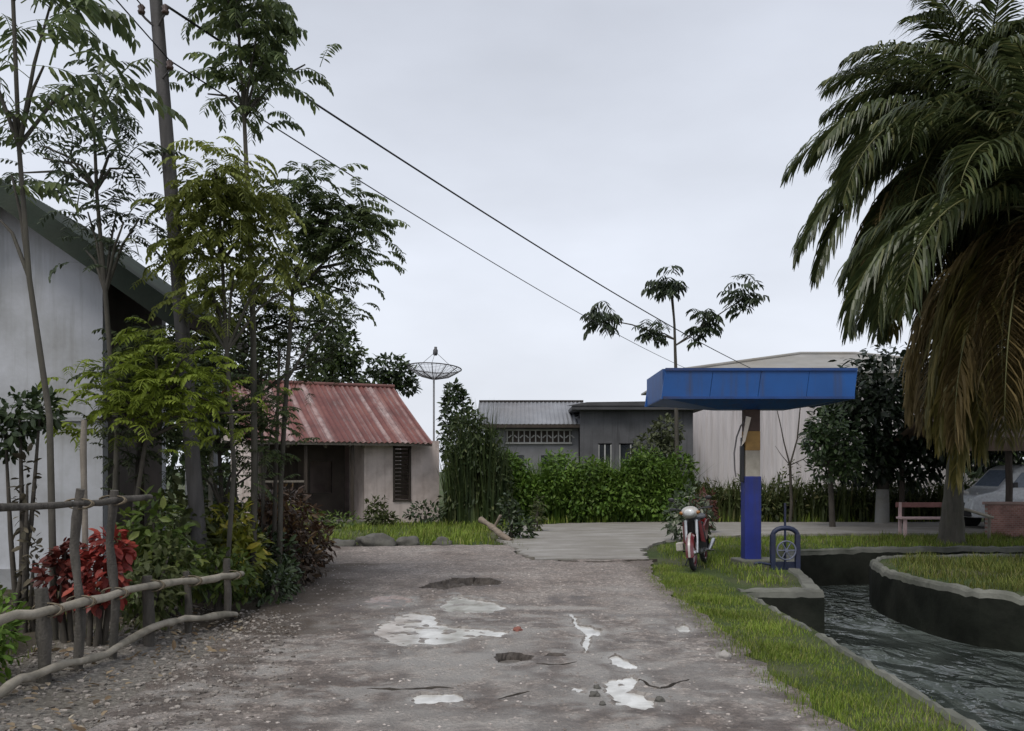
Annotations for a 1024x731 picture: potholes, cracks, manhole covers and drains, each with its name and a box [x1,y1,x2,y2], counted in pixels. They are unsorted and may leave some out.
crack [638,679,690,689]
pothole [371,612,510,646]
pothole [601,674,658,710]
pothole [407,691,464,704]
pothole [608,653,638,669]
pothole [494,652,534,663]
pothole [437,594,508,614]
pothole [418,577,502,590]
